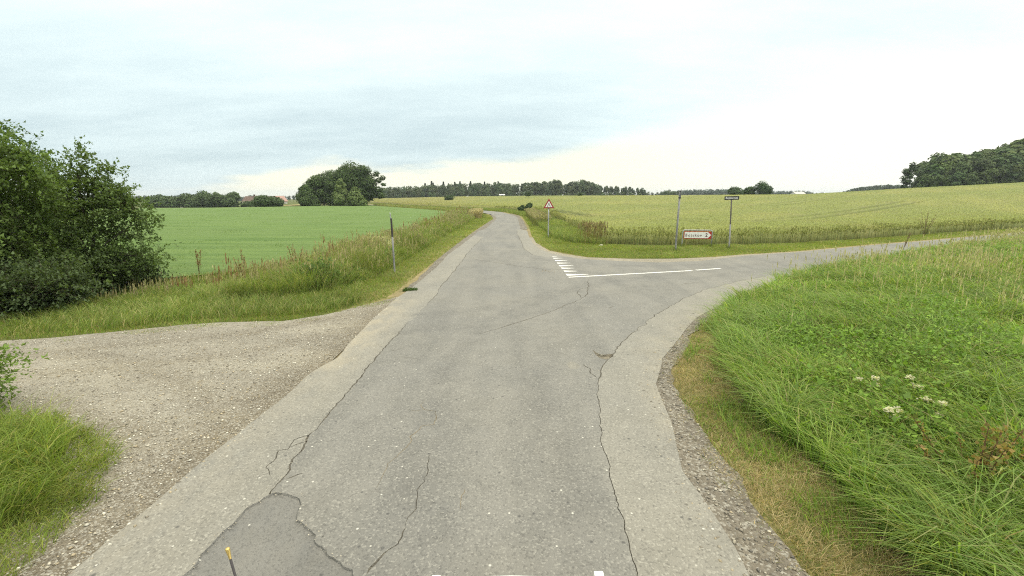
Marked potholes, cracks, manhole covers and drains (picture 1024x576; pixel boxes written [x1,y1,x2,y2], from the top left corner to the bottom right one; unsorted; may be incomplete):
crack [367,405,437,573]
crack [266,323,419,495]
crack [480,279,589,334]
